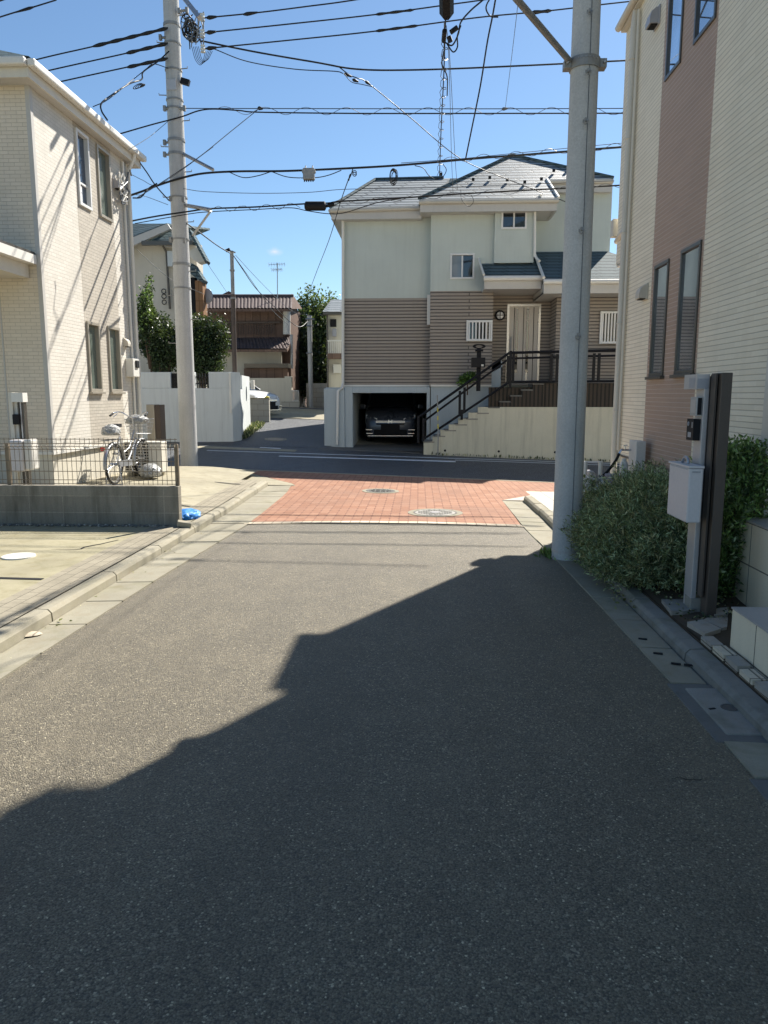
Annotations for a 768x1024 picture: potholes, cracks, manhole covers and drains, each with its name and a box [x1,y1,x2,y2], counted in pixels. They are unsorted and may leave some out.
manhole cover [1,552,36,560]
manhole cover [408,509,463,517]
